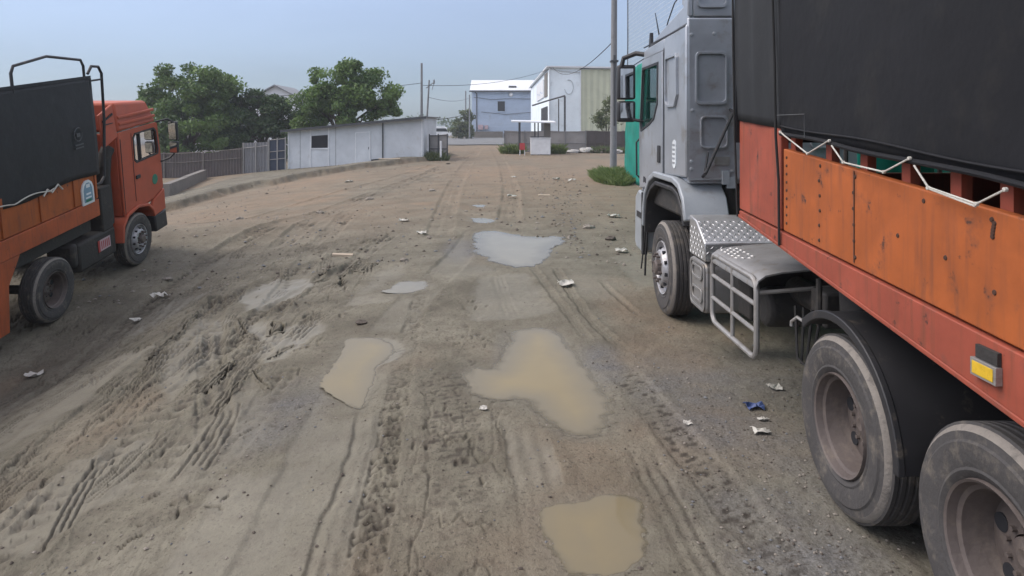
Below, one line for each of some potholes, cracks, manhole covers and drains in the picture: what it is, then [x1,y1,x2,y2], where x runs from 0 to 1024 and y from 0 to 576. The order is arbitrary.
pothole [319,336,413,409]
pothole [380,279,431,294]
pothole [528,491,648,576]
pothole [471,230,566,268]
pothole [460,326,620,439]
